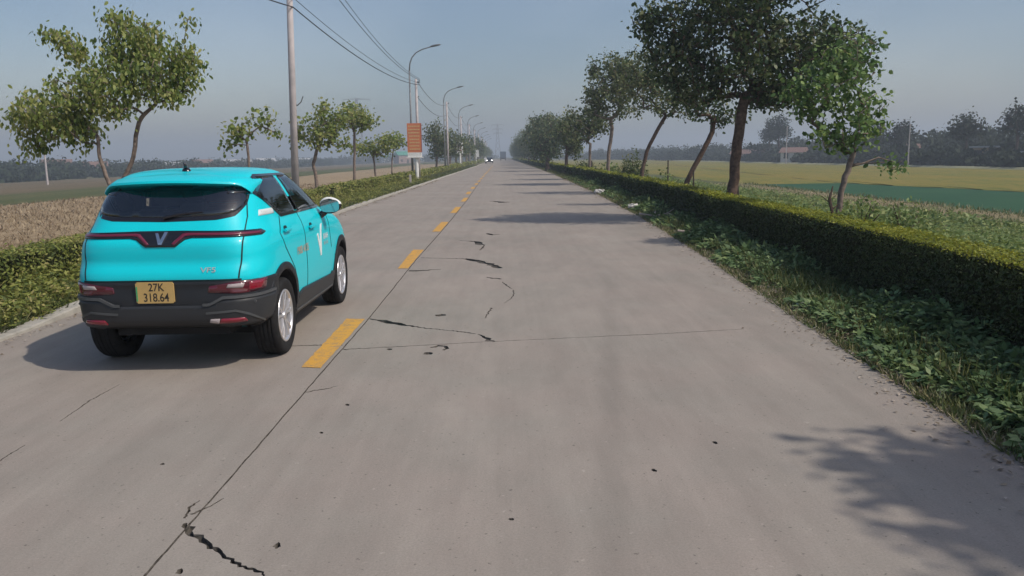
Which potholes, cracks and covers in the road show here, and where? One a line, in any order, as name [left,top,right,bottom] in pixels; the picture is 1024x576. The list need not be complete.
crack [371,233,515,342]
crack [182,498,265,576]
